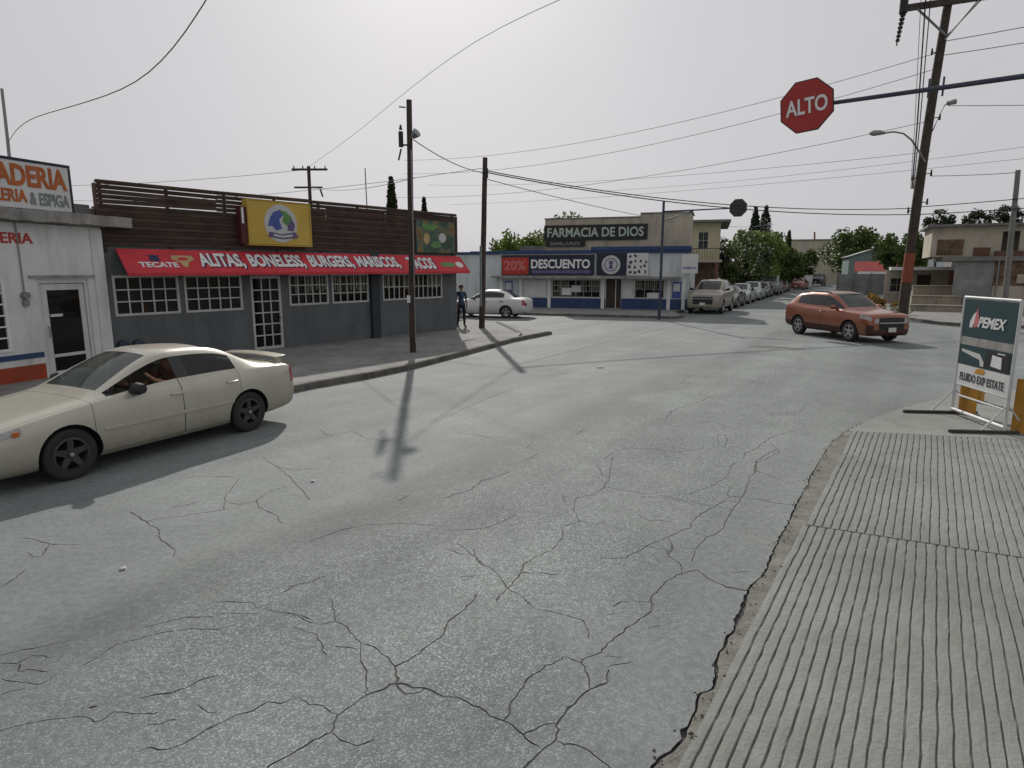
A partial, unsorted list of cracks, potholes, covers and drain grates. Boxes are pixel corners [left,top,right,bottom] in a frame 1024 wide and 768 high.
crack [1,418,873,768]
